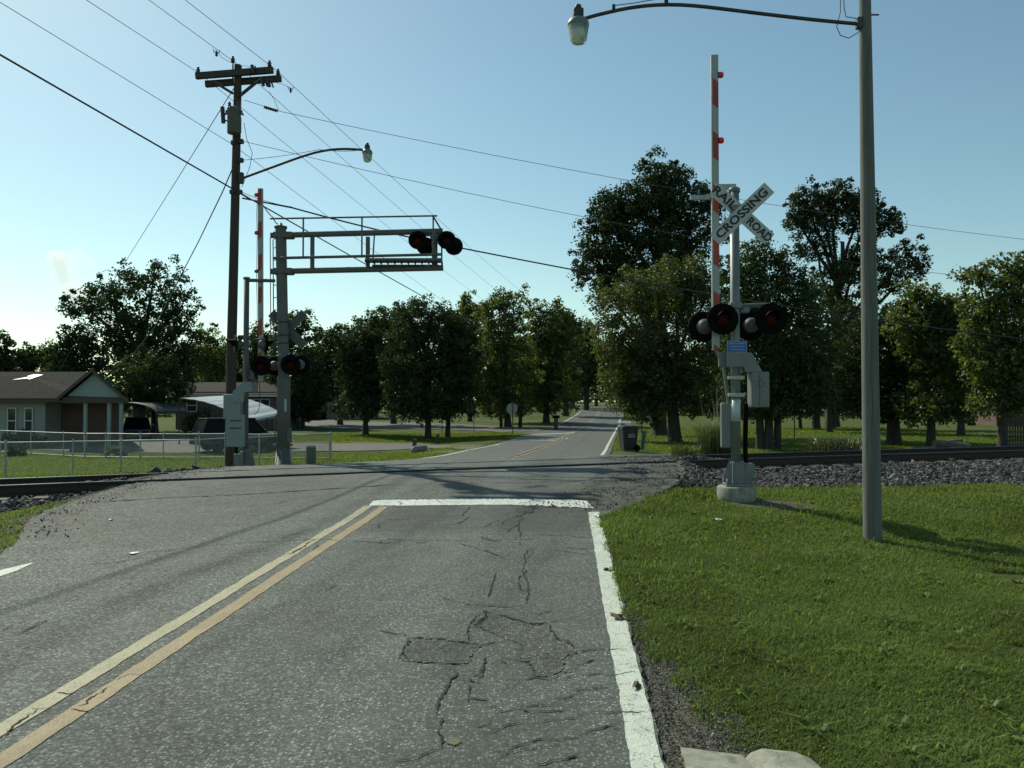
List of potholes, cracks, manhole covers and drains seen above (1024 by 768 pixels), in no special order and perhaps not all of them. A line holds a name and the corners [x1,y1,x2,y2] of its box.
crack [1,674,128,736]
crack [349,498,645,766]
crack [195,530,332,553]
